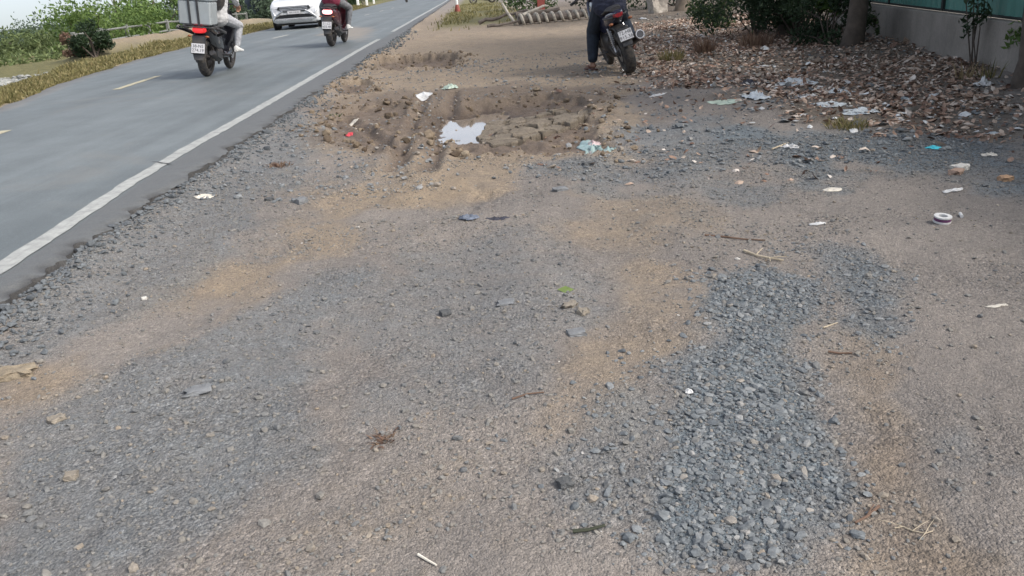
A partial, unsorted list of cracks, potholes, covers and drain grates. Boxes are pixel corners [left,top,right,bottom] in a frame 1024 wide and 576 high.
pothole [312,95,428,157]
pothole [363,52,475,71]
pothole [431,90,629,157]
